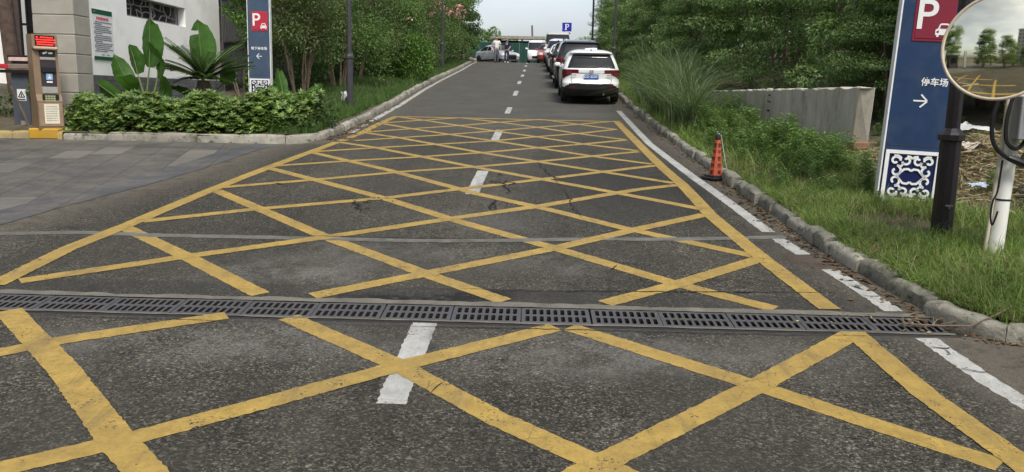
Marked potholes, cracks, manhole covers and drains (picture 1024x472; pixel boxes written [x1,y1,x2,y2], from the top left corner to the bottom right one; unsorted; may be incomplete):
drain grate [240,301,320,318]
drain grate [793,315,878,333]
crack [486,169,515,210]
drain grate [862,317,949,335]
drain grate [310,303,386,320]
drain grate [451,306,521,324]
drain grate [658,311,734,330]
drain grate [590,309,663,328]
crack [349,197,394,211]
drain grate [100,298,187,315]
drain grate [170,299,254,316]
